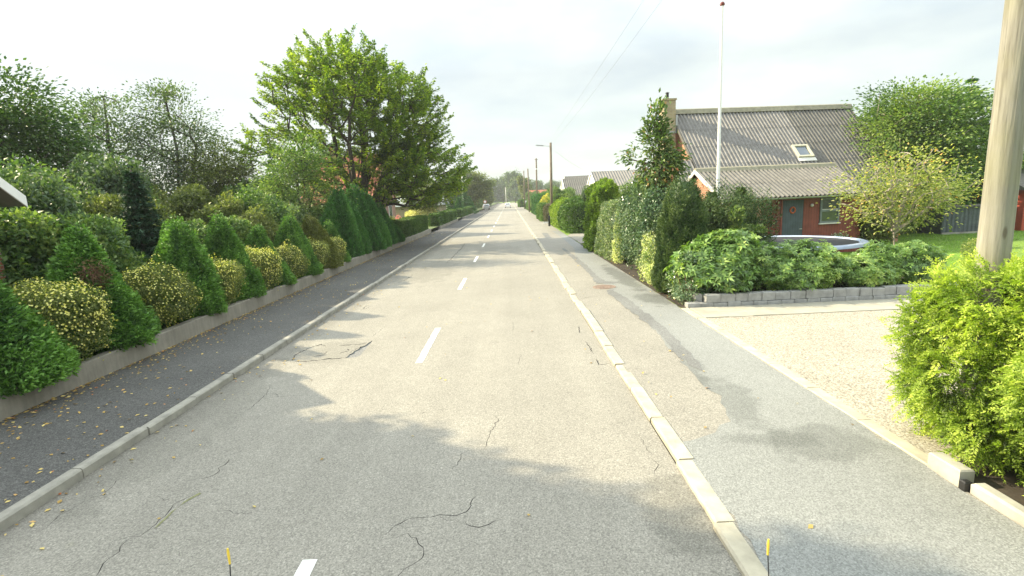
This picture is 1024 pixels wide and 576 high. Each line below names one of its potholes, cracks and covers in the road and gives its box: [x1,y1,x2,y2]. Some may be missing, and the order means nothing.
crack [96,462,228,576]
crack [384,493,504,576]
